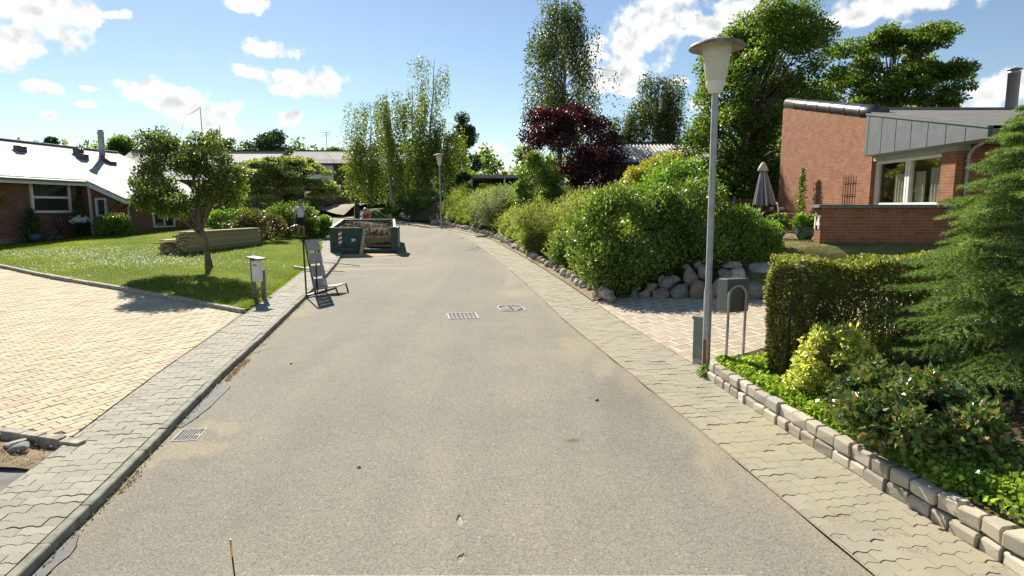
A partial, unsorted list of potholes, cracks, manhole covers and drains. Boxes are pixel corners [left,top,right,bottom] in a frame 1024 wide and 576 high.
drain grate [171,428,207,442]
